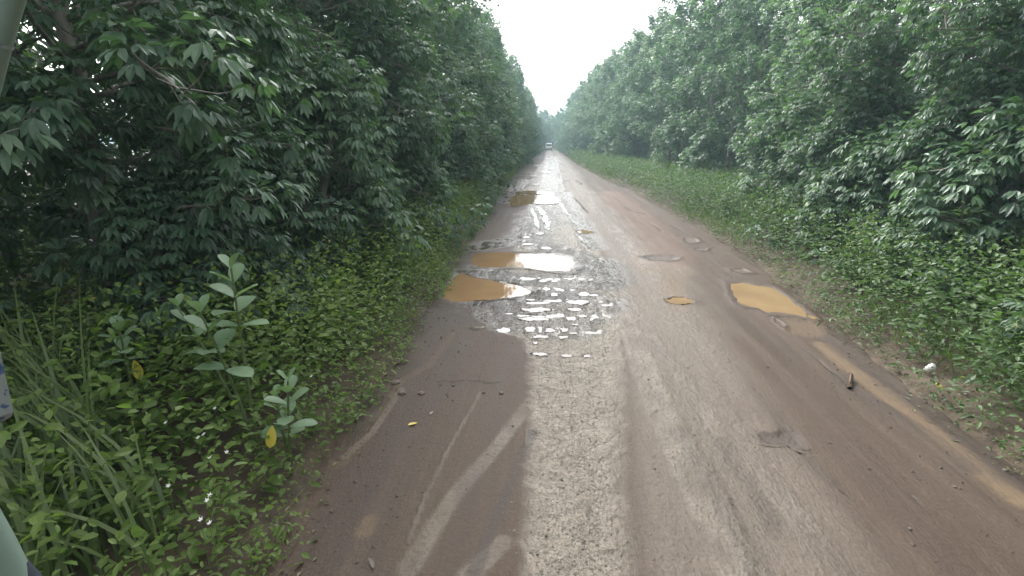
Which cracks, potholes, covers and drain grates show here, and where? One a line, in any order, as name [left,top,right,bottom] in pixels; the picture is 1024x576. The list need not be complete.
pothole [457,249,585,274]
pothole [507,194,561,207]
pothole [725,279,817,322]
pothole [750,426,813,453]
pothole [664,296,695,305]
pothole [434,270,541,305]
